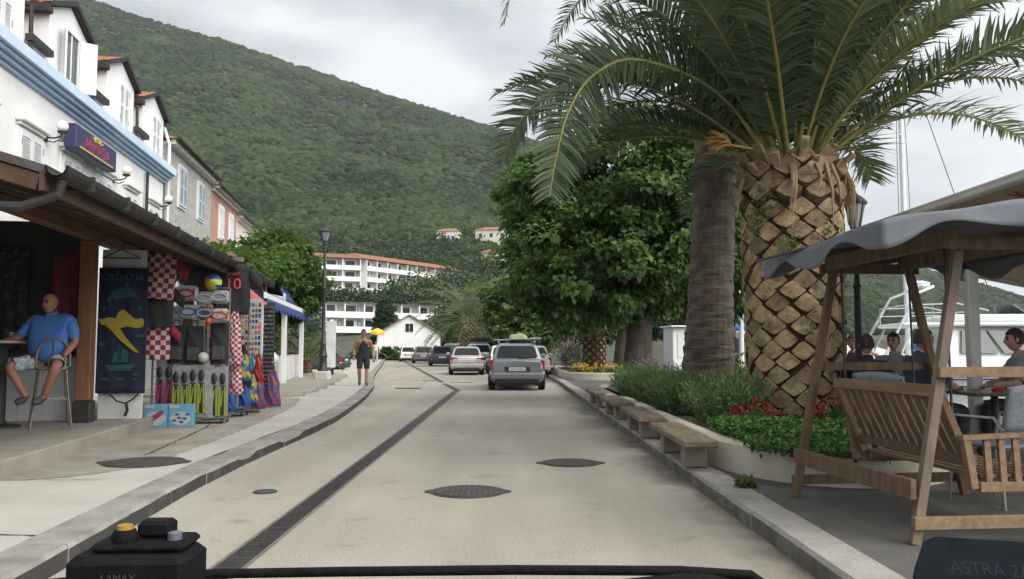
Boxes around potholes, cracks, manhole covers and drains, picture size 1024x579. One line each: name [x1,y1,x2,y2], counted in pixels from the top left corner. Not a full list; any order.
manhole cover [425,485,511,498]
manhole cover [96,456,191,468]
manhole cover [536,458,605,467]
